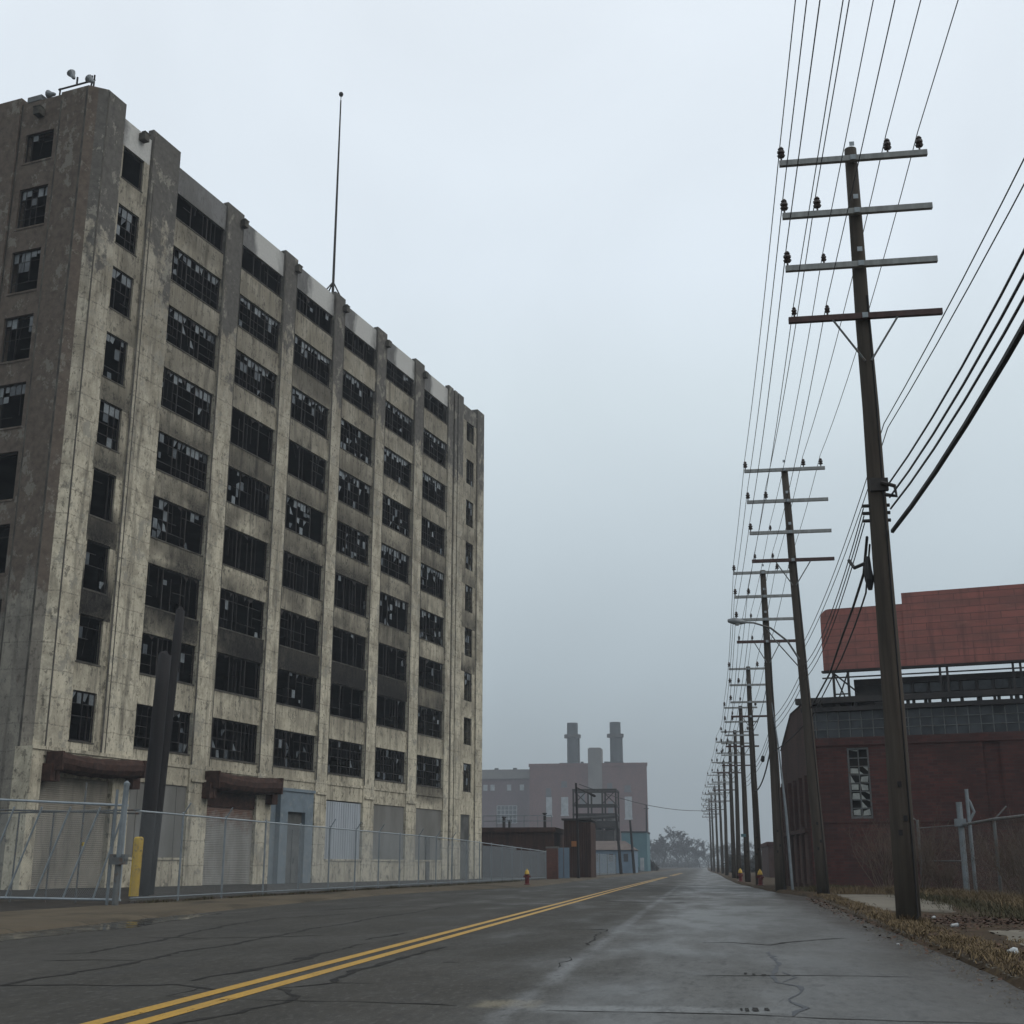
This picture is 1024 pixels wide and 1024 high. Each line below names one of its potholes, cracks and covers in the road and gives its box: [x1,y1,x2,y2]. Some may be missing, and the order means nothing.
crack [0,905,460,1024]
crack [708,938,898,1016]
